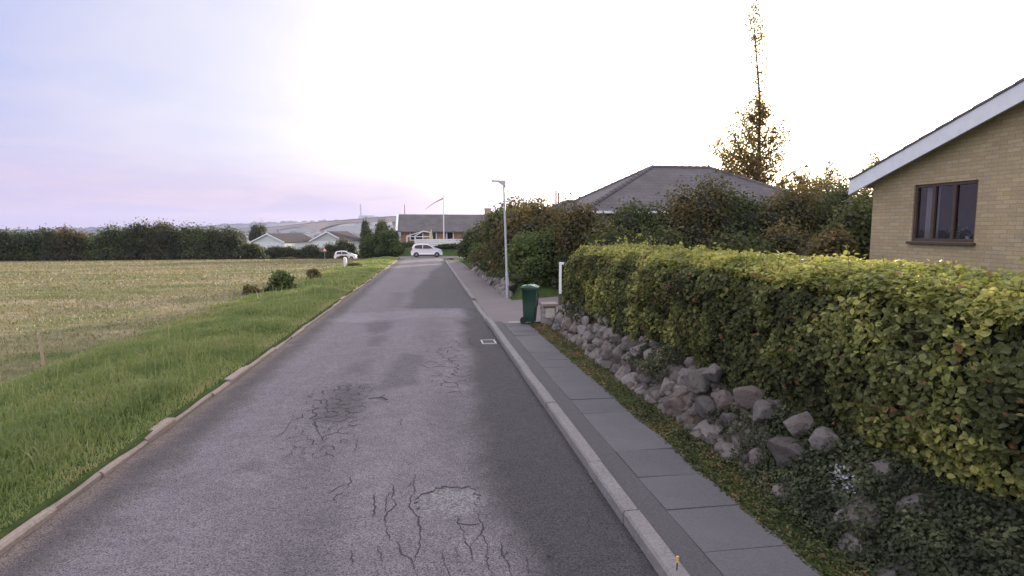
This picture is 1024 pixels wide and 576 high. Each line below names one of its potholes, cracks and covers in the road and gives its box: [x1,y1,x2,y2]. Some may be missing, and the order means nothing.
pothole [405,483,487,520]
crack [276,385,374,464]
crack [423,339,482,394]
crack [372,473,422,576]
crack [442,503,529,576]
